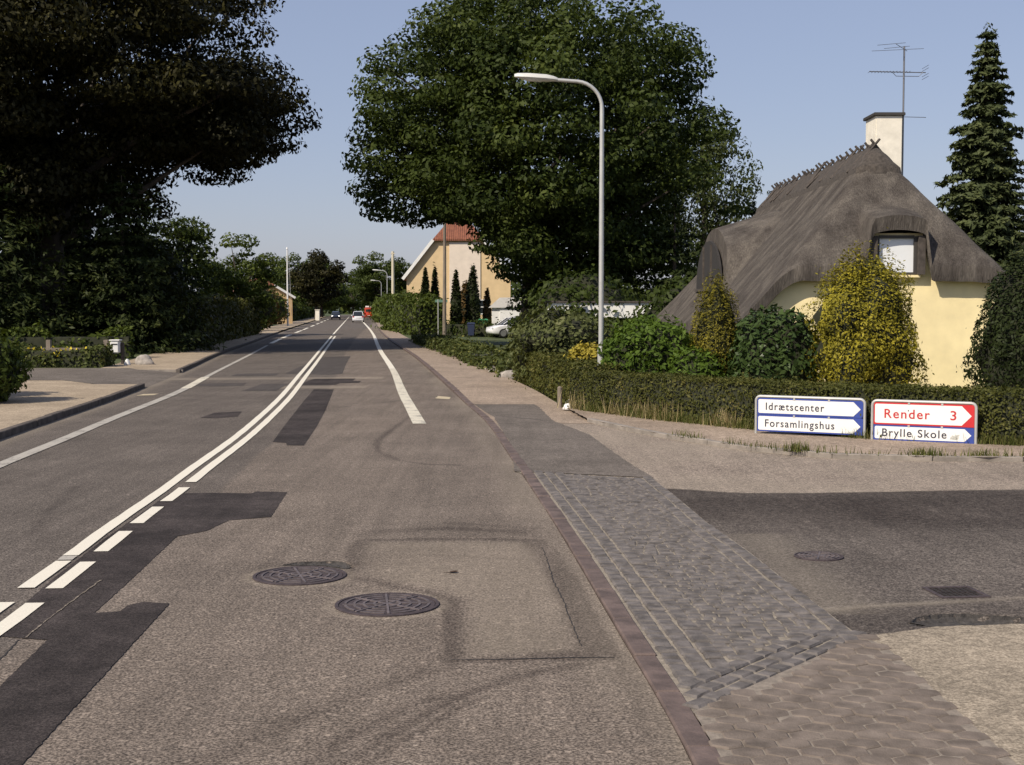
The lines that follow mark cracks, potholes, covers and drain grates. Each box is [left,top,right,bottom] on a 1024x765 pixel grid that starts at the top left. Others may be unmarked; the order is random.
manhole cover [252,566,347,586]
manhole cover [335,592,439,617]
drain grate [921,586,991,599]
manhole cover [794,551,844,561]
